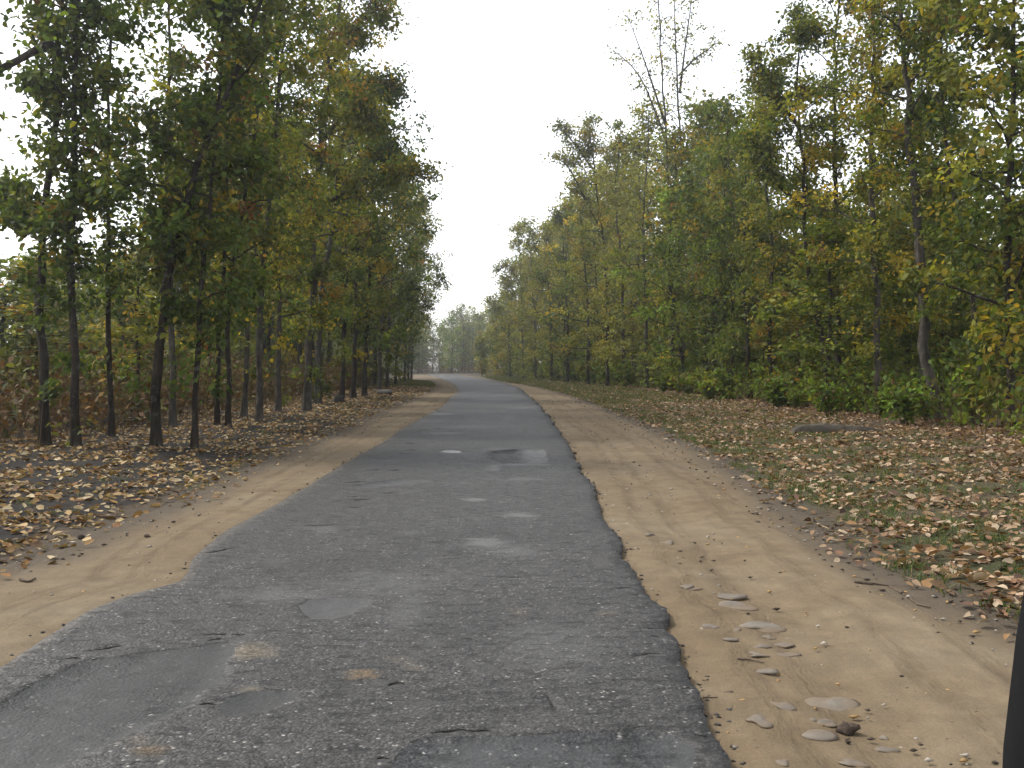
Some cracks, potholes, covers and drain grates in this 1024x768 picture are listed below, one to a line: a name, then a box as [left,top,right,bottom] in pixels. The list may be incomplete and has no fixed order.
pothole [489,449,549,463]
